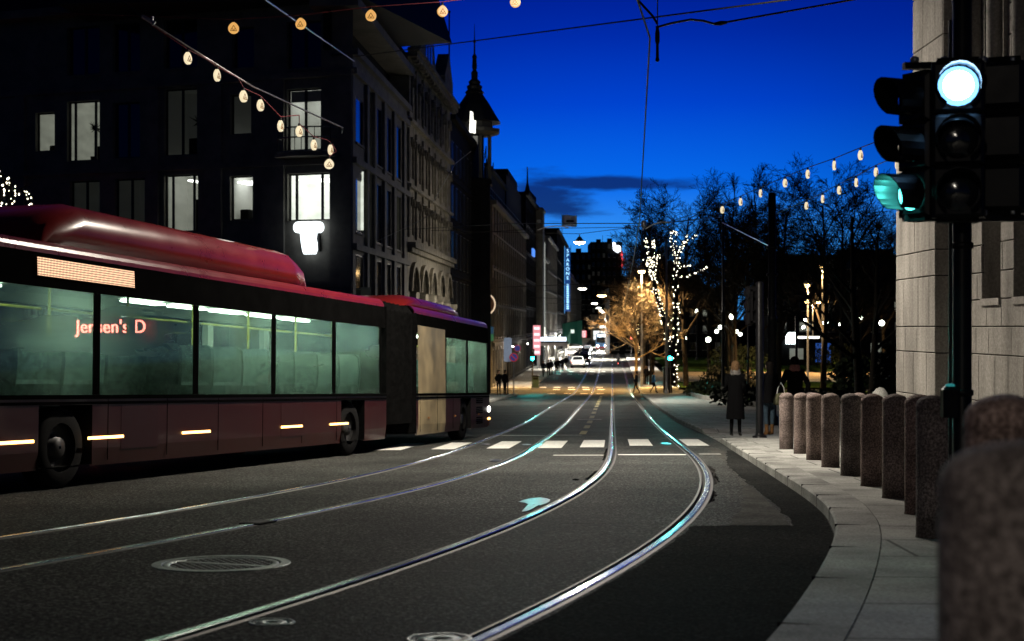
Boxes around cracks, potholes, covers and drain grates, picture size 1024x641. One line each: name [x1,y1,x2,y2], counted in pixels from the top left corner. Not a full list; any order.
manhole cover [406,632,473,641]
manhole cover [151,555,291,573]
manhole cover [248,618,295,627]
